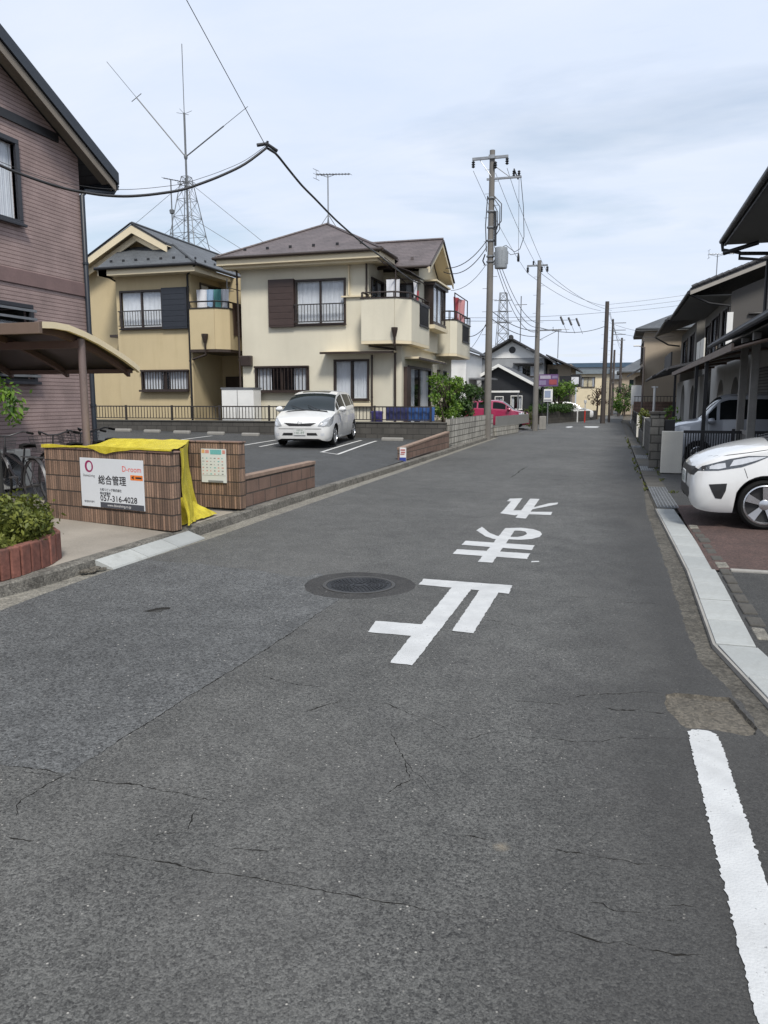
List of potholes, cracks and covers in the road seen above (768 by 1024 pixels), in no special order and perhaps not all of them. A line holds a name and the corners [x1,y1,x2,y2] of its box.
drain grate [648,487,673,499]
crack [389,732,434,792]
crack [515,735,677,743]
manhole cover [304,572,416,599]
crack [4,765,222,837]
drain grate [653,498,679,509]
crack [589,902,695,921]
crack [103,853,508,922]
crack [557,930,701,956]
crack [514,692,664,714]
